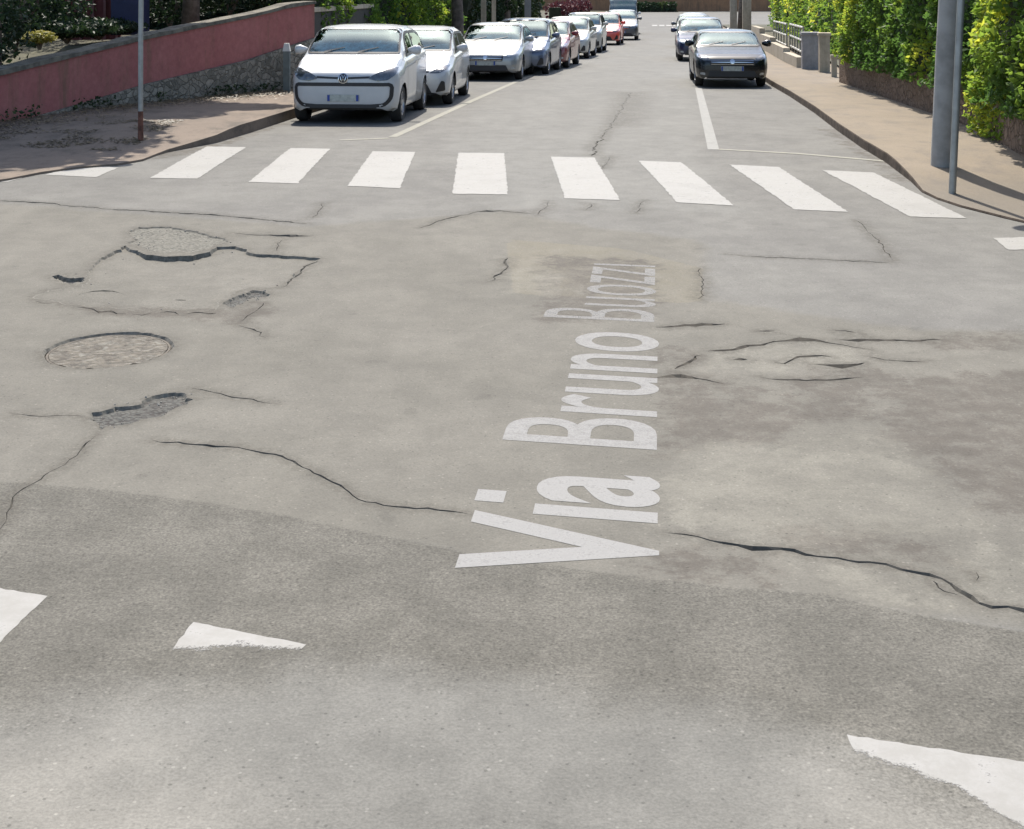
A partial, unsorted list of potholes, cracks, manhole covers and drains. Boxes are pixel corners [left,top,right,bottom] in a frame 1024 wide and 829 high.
crack [153,440,467,514]
crack [489,258,509,282]
crack [657,323,938,384]
crack [12,201,323,250]
crack [0,414,93,529]
pothole [90,392,193,430]
crack [591,93,631,169]
crack [421,210,521,228]
pothole [127,227,231,253]
crack [672,533,1024,613]
crack [755,220,891,262]
